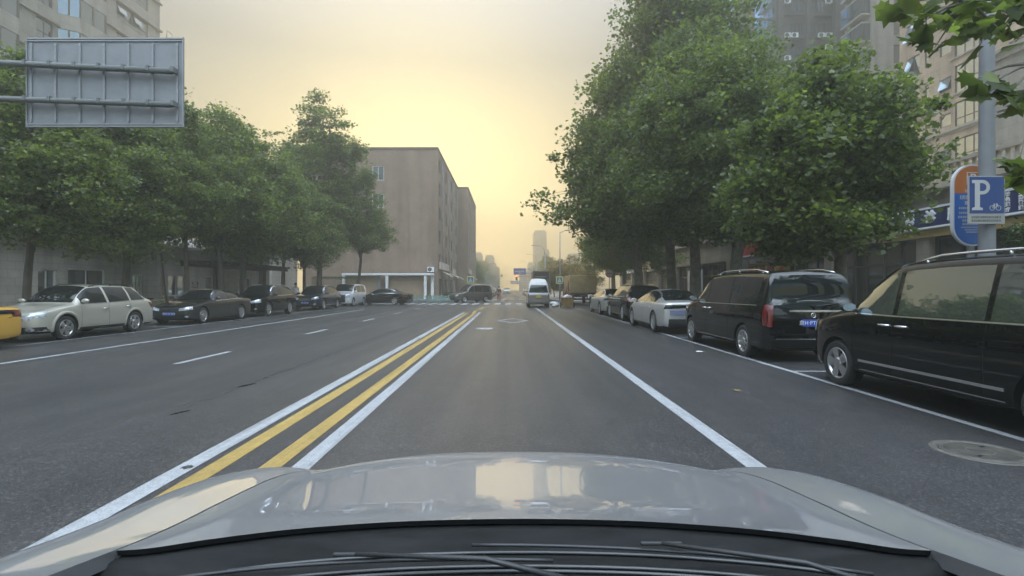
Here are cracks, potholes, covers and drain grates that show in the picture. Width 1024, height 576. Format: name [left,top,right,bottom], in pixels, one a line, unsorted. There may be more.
manhole cover [928,440,1024,466]
